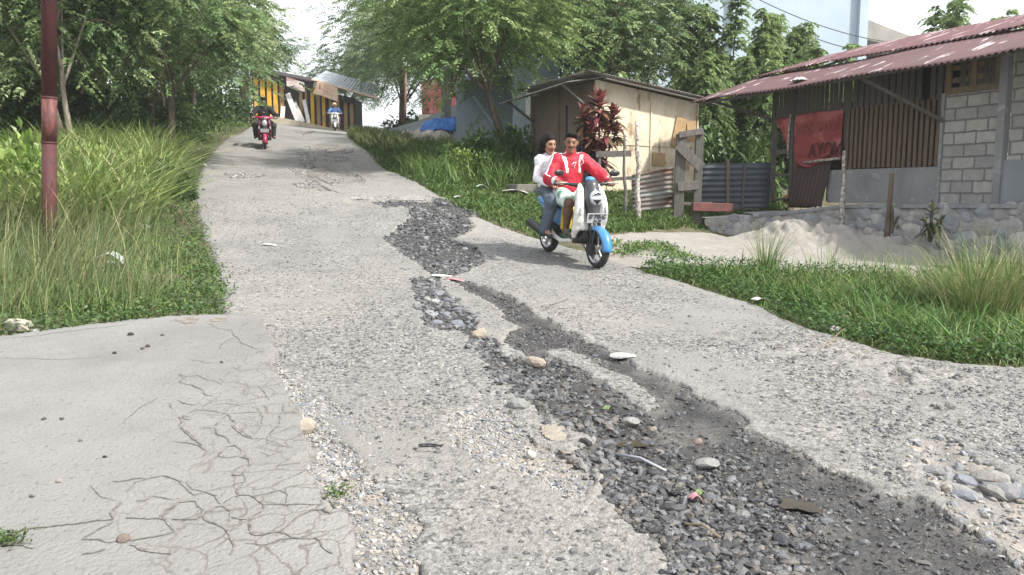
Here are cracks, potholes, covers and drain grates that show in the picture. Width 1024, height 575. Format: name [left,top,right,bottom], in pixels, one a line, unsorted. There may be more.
pothole [288,167,331,192]
pothole [371,197,485,278]
pothole [295,151,316,170]
pothole [449,279,578,359]
pothole [408,276,507,358]
pothole [304,167,364,183]
crack [0,323,333,554]
pothole [481,339,1024,575]
